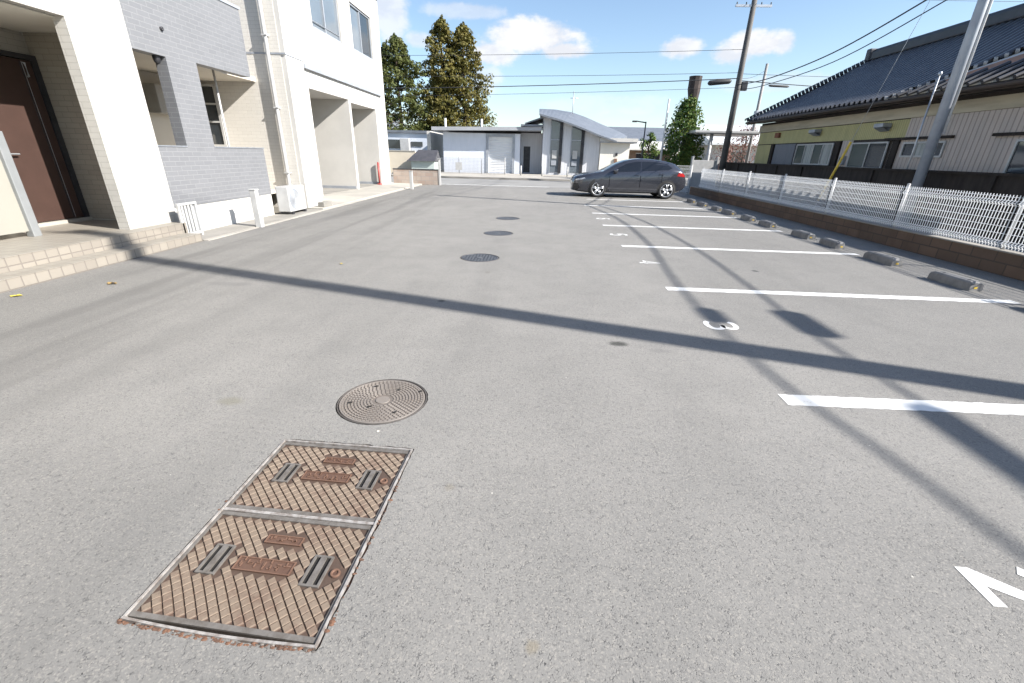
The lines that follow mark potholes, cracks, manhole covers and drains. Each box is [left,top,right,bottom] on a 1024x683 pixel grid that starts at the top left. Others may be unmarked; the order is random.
manhole cover [460,253,499,262]
manhole cover [336,379,427,425]
manhole cover [116,439,414,653]
